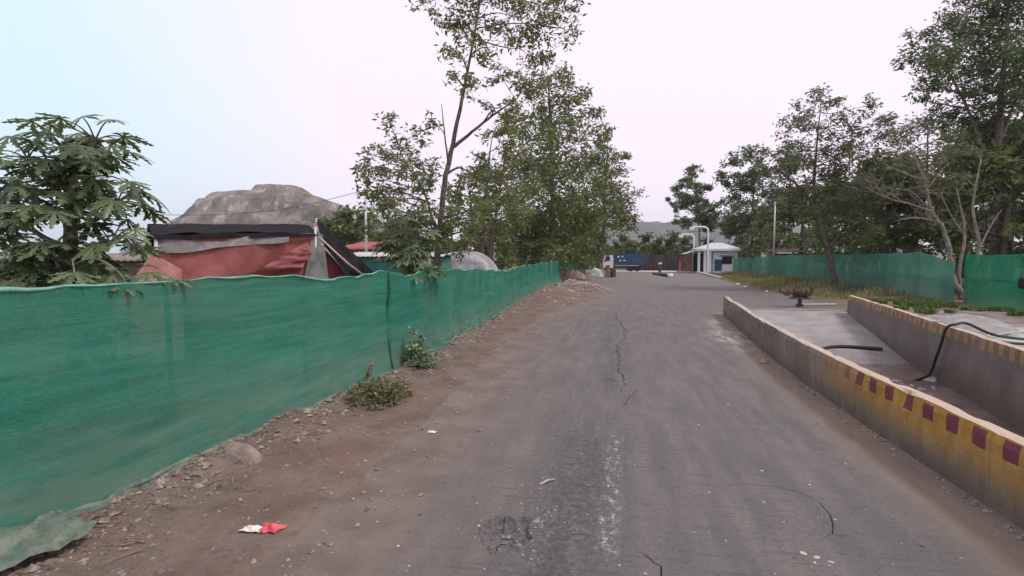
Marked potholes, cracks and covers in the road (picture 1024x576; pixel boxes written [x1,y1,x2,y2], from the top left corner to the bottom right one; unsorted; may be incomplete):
crack [597,312,637,405]
crack [740,484,834,541]
pothole [479,516,533,555]
